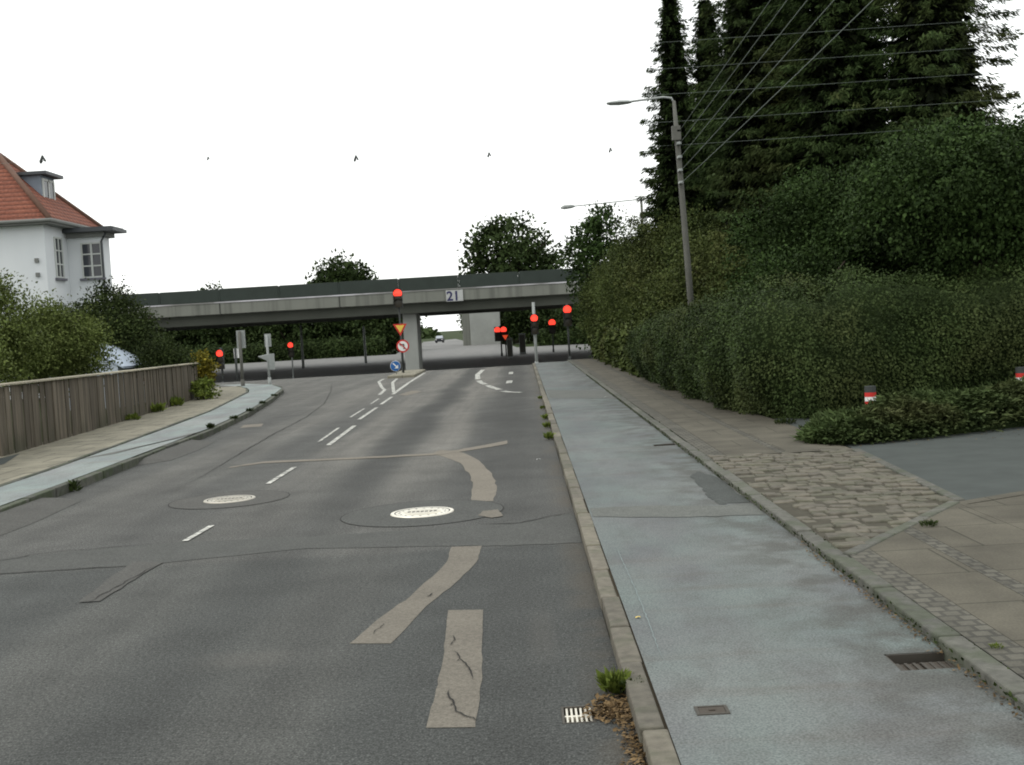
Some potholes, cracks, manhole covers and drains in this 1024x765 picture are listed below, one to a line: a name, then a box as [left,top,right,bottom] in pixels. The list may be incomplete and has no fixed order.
utility cover [694,705,731,716]
manhole cover [203,495,256,503]
manhole cover [390,507,454,518]
drain grate [885,652,956,671]
crack [447,636,477,720]
drain grate [561,705,596,724]
